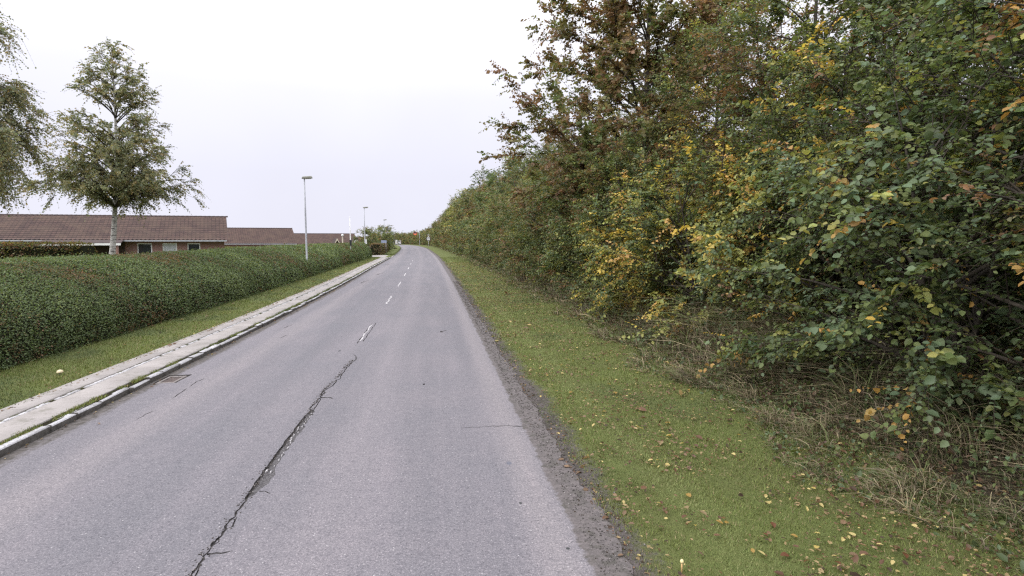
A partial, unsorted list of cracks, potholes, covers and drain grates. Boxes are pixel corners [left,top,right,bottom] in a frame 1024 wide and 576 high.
crack [191,323,376,576]
